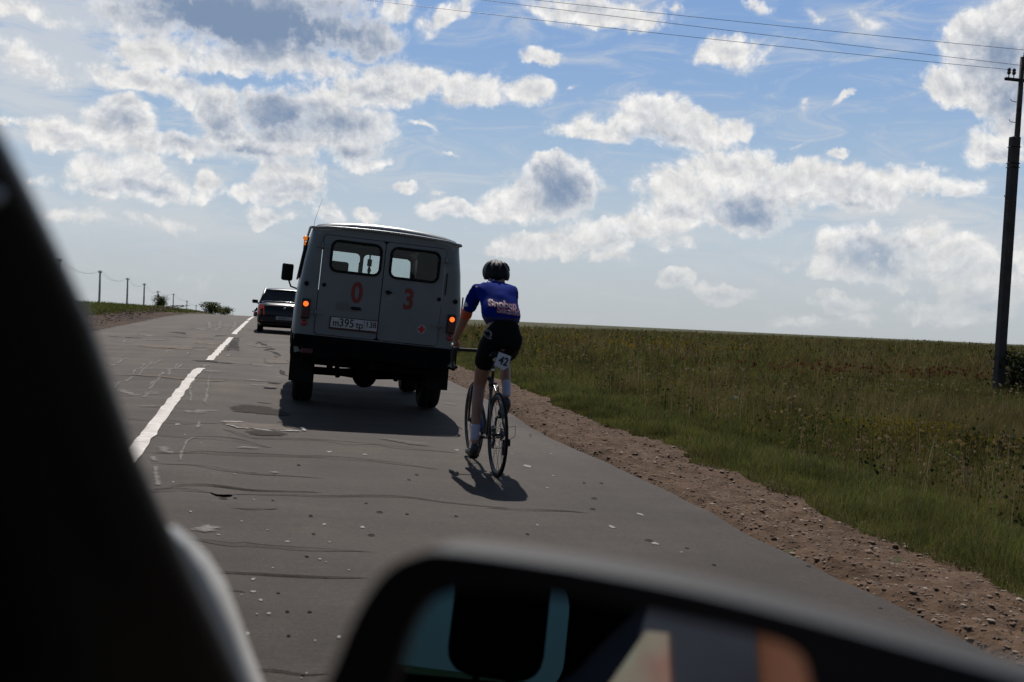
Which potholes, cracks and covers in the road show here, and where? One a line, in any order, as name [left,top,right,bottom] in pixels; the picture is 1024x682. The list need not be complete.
crack [125,406,586,513]
crack [249,341,288,384]
crack [192,538,371,552]
